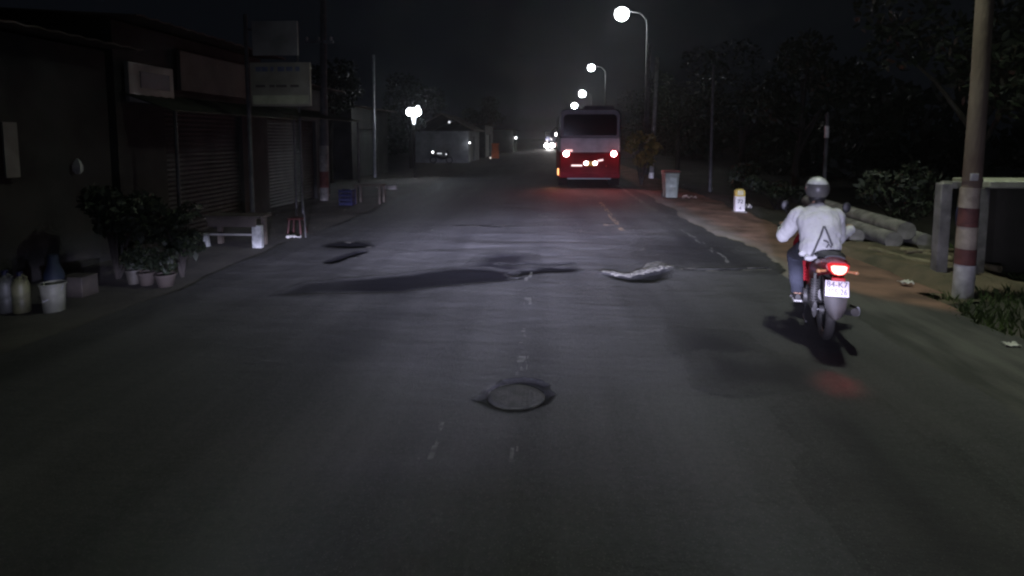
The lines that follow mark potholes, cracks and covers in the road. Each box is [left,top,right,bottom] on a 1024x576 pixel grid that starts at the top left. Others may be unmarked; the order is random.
manhole cover [469,377,558,413]
